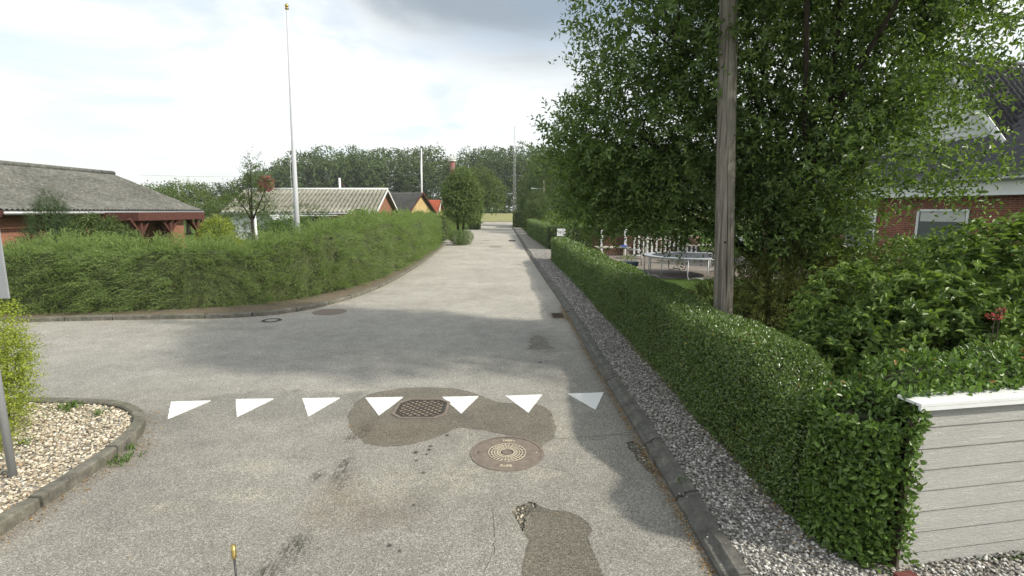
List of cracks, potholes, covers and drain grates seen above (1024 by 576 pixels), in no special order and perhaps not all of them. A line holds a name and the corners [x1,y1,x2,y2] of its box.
pothole [624,440,660,476]
pothole [509,499,540,534]
manhole cover [470,436,544,472]
